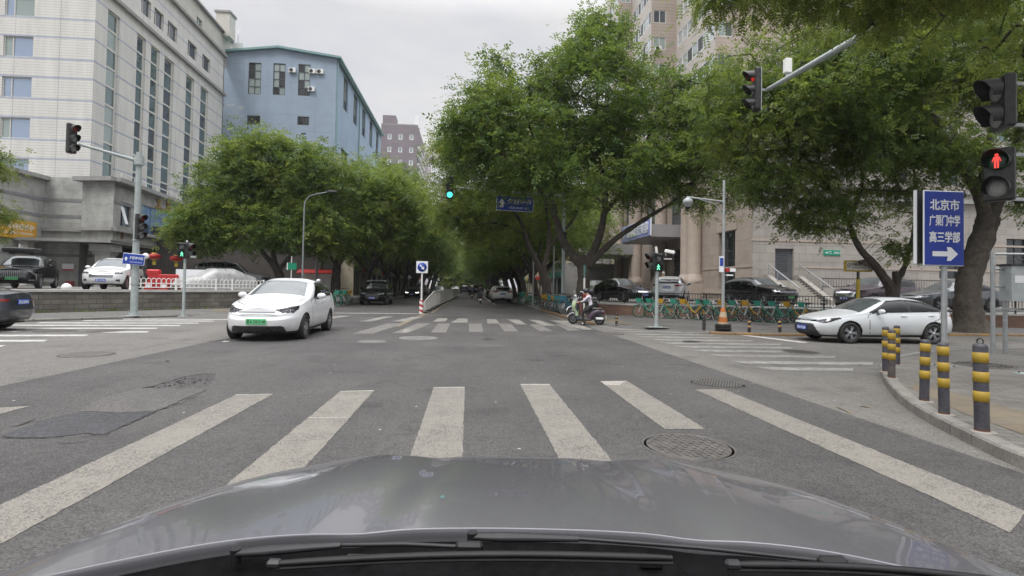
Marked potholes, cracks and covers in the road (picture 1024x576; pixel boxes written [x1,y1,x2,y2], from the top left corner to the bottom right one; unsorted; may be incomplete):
manhole cover [689,379,747,389]
manhole cover [950,361,1020,369]
manhole cover [641,433,737,461]
